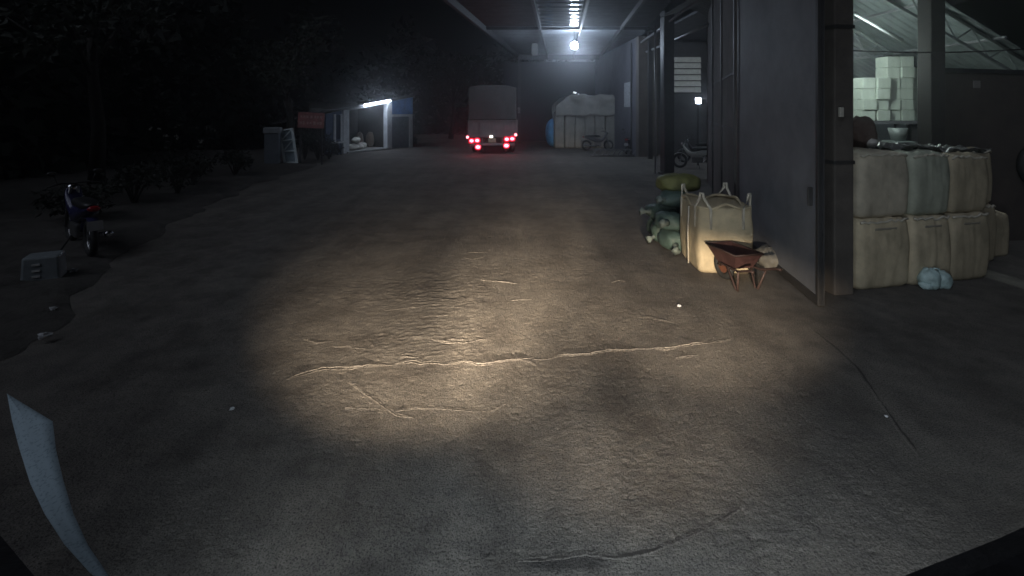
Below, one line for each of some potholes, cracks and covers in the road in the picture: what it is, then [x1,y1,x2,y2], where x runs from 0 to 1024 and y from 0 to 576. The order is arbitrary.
crack [286,316,730,419]
crack [481,279,531,301]
crack [812,329,922,456]
